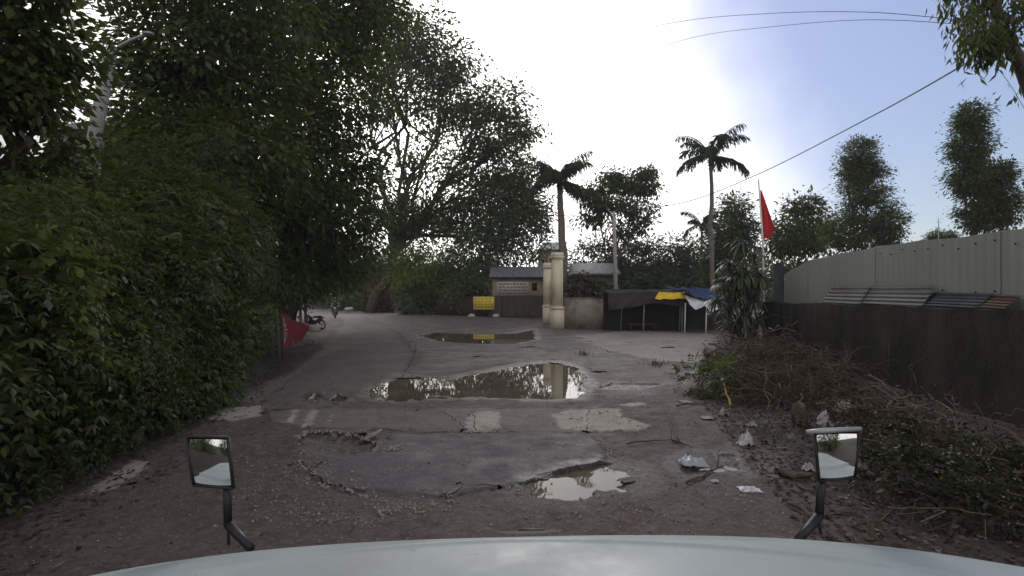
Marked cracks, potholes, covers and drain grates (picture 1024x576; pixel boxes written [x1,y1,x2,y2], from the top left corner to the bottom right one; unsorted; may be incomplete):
pothole [398,328,559,346]
crack [431,408,482,433]
crack [381,342,430,378]
crack [573,408,596,433]
pothole [349,360,600,404]
pothole [508,456,659,509]
